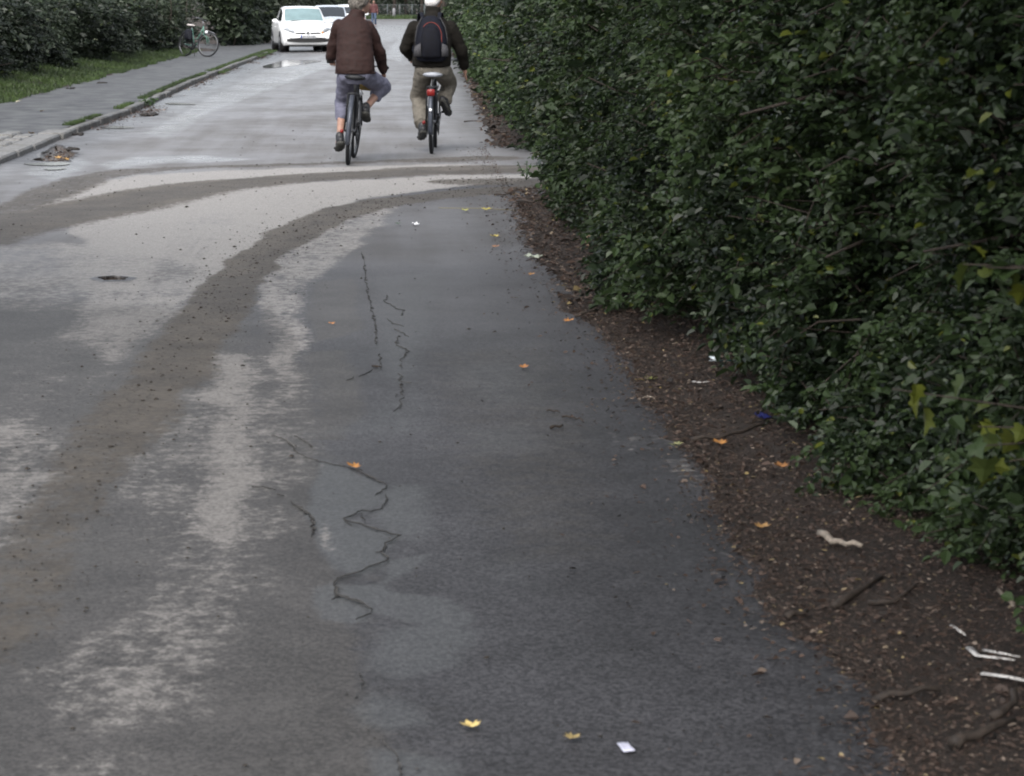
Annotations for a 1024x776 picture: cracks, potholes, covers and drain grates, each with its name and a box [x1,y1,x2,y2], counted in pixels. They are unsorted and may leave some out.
crack [251,435,401,620]
crack [383,295,412,411]
